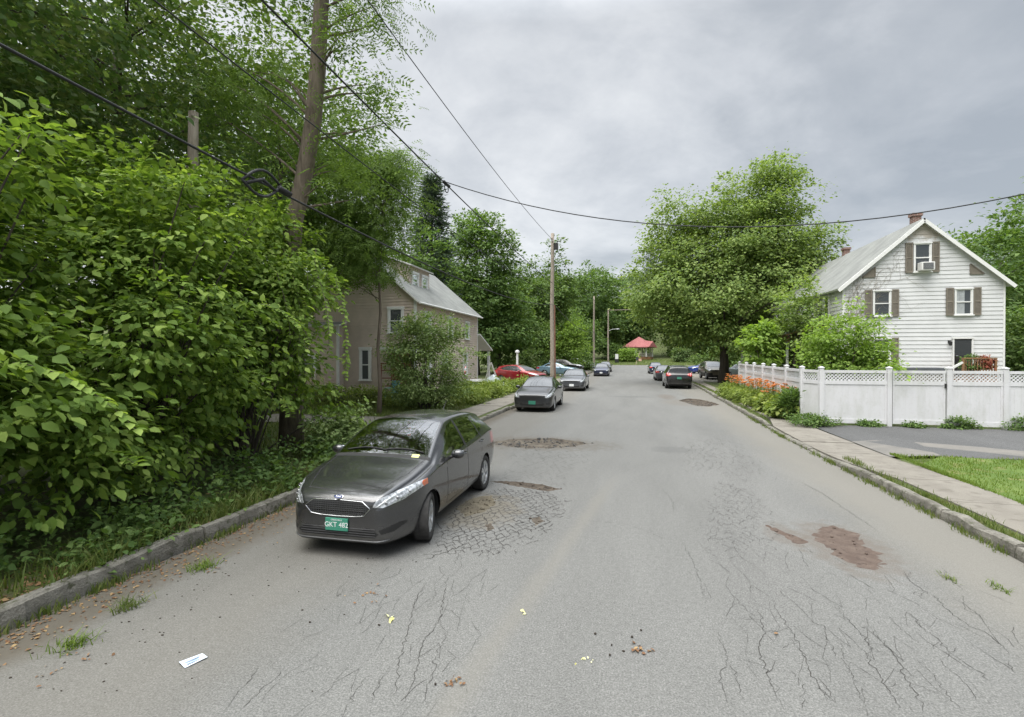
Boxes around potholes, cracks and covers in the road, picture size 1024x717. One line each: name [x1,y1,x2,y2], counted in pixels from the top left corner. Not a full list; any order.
crack [253,449,596,717]
pothole [494,437,593,449]
crack [681,439,783,558]
crack [683,540,1020,716]
pothole [492,481,562,491]
